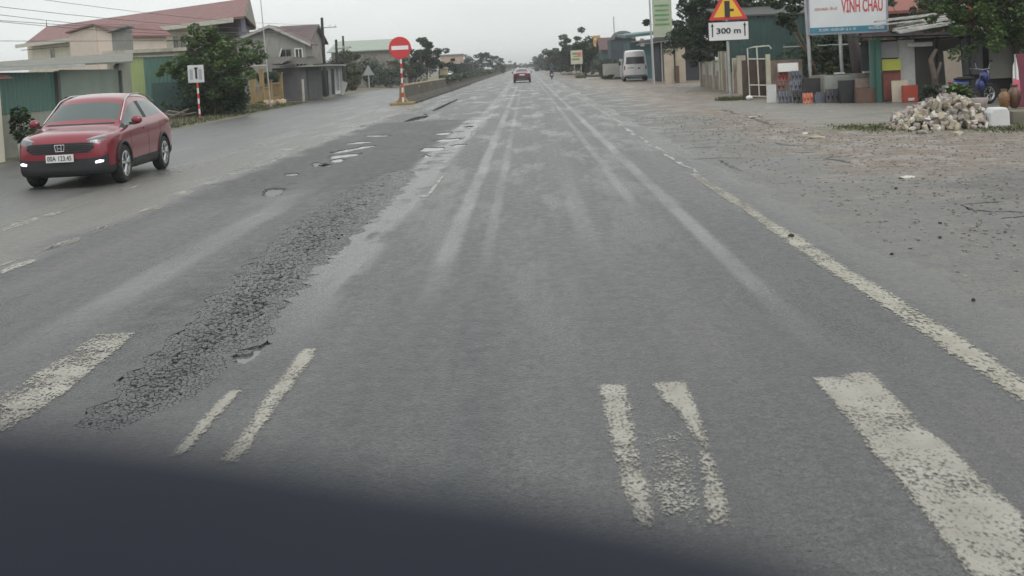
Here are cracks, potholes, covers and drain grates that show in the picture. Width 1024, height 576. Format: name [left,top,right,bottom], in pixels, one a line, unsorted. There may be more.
crack [961,201,1024,219]
crack [72,169,415,433]
pothole [329,145,377,153]
pothole [231,340,272,364]
pothole [262,188,286,197]
